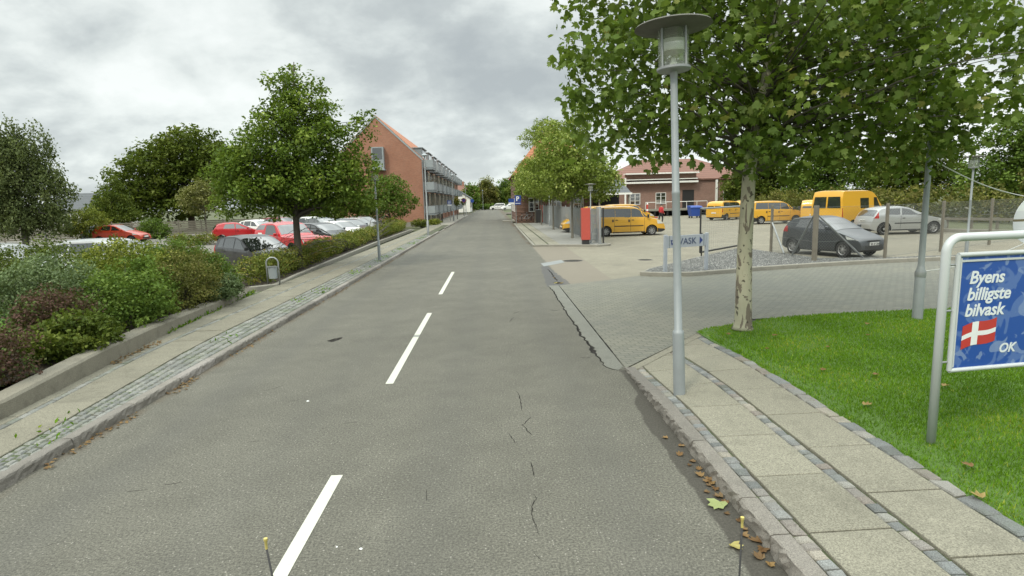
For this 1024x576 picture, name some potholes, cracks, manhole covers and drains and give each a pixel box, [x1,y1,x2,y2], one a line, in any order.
crack [549,270,622,370]
crack [509,392,541,560]
